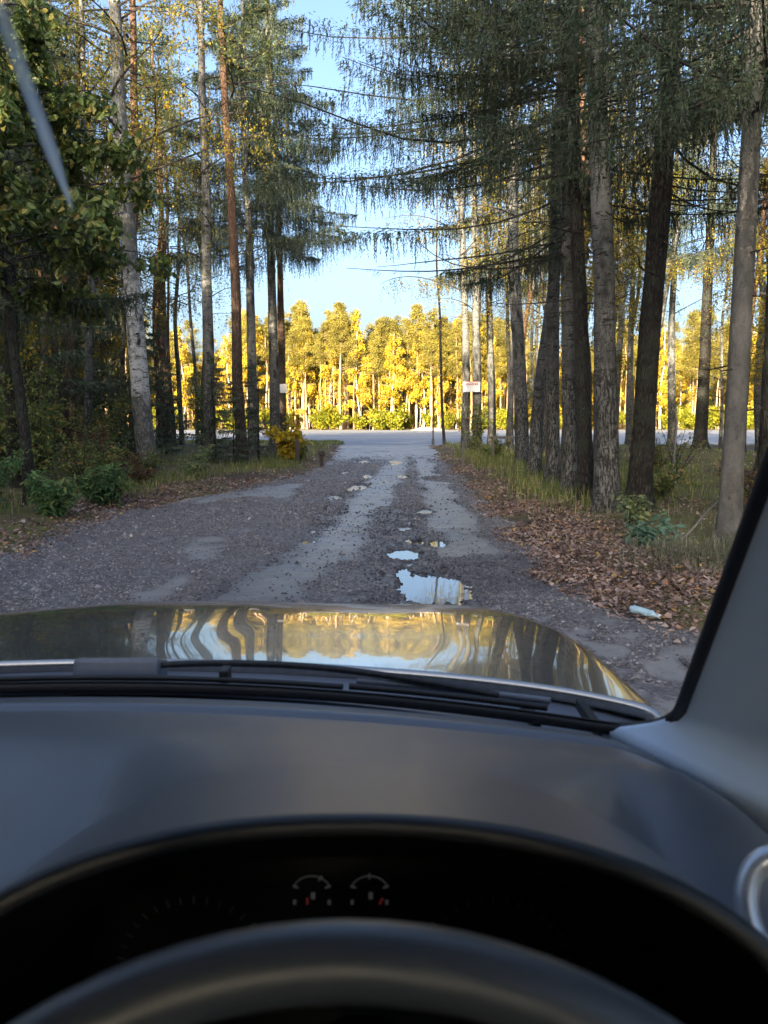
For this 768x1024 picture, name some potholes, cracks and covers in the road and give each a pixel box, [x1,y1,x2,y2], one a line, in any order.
pothole [381,548,419,560]
pothole [393,567,478,606]
